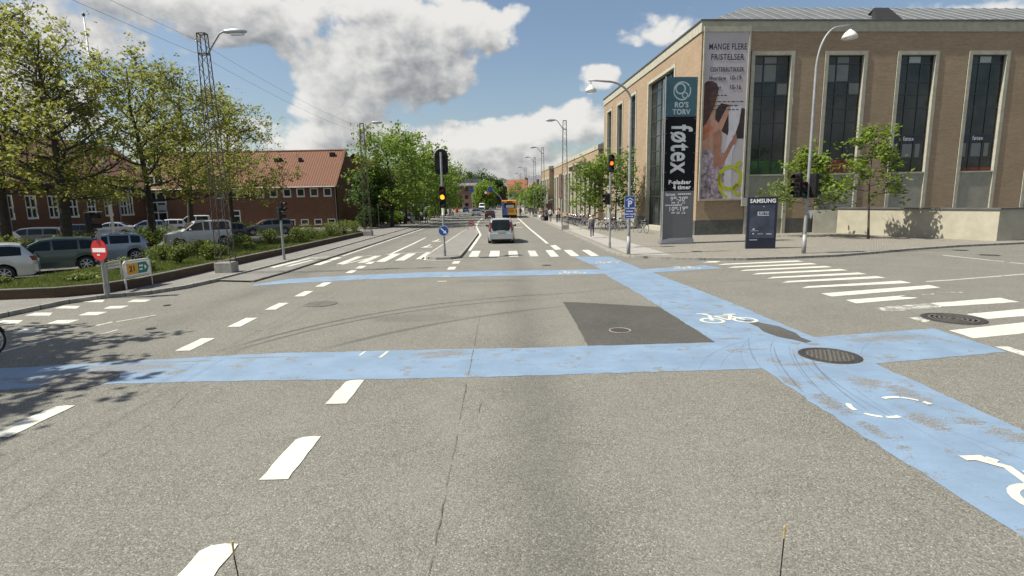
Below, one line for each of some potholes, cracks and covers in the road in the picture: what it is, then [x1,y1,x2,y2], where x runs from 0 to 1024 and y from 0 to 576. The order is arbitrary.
manhole cover [920,313,989,325]
manhole cover [798,347,863,364]
